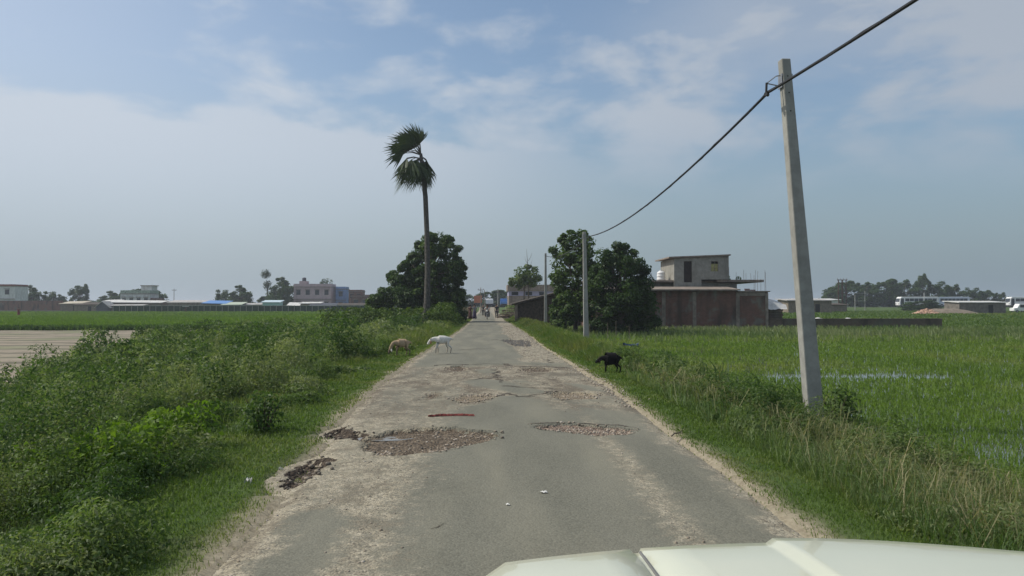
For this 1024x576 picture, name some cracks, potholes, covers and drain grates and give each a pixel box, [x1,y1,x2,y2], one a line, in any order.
crack [434,349,569,397]
pothole [319,425,375,441]
pothole [544,390,601,400]
pothole [357,425,504,457]
pothole [531,421,639,436]
pothole [446,393,498,403]
pothole [502,339,533,347]
